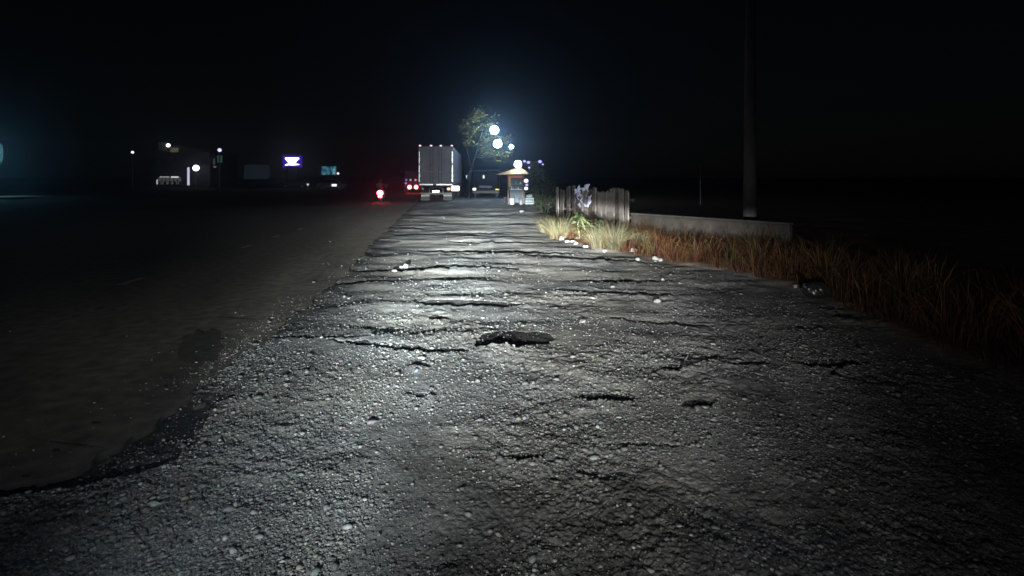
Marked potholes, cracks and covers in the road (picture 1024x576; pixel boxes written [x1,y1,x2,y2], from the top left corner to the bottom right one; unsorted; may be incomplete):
pothole [681,399,715,408]
pothole [473,331,554,347]
